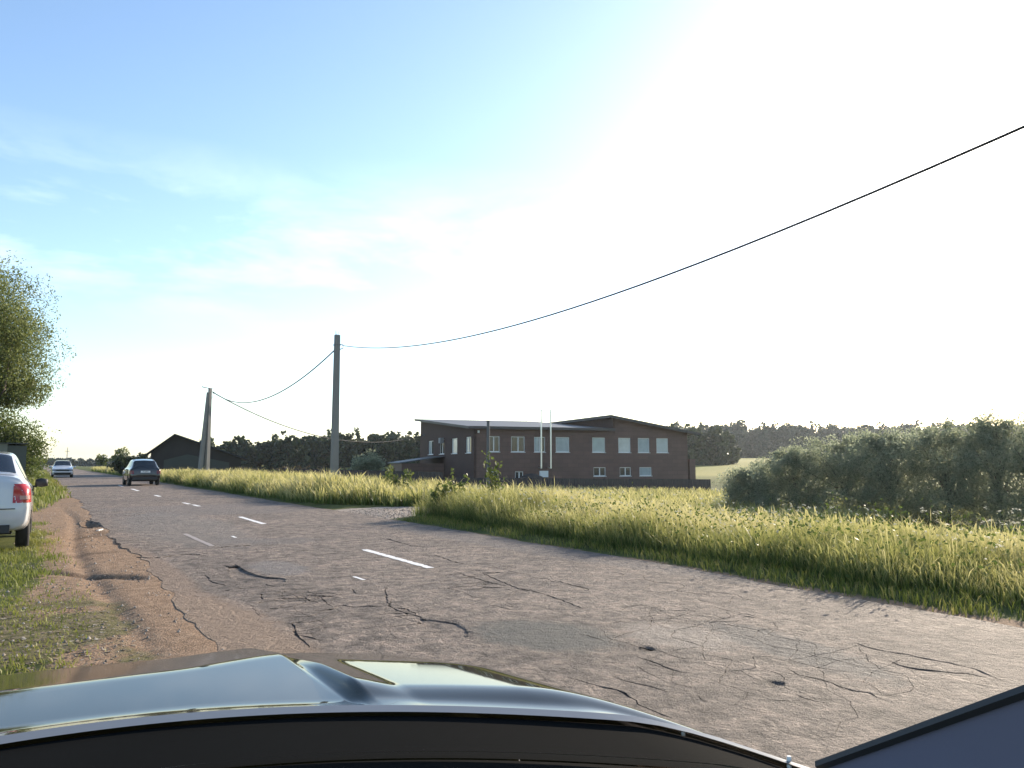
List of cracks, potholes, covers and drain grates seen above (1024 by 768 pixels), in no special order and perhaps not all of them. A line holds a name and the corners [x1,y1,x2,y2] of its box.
crack [137,545,432,648]
crack [386,538,589,610]
crack [564,572,1005,737]
